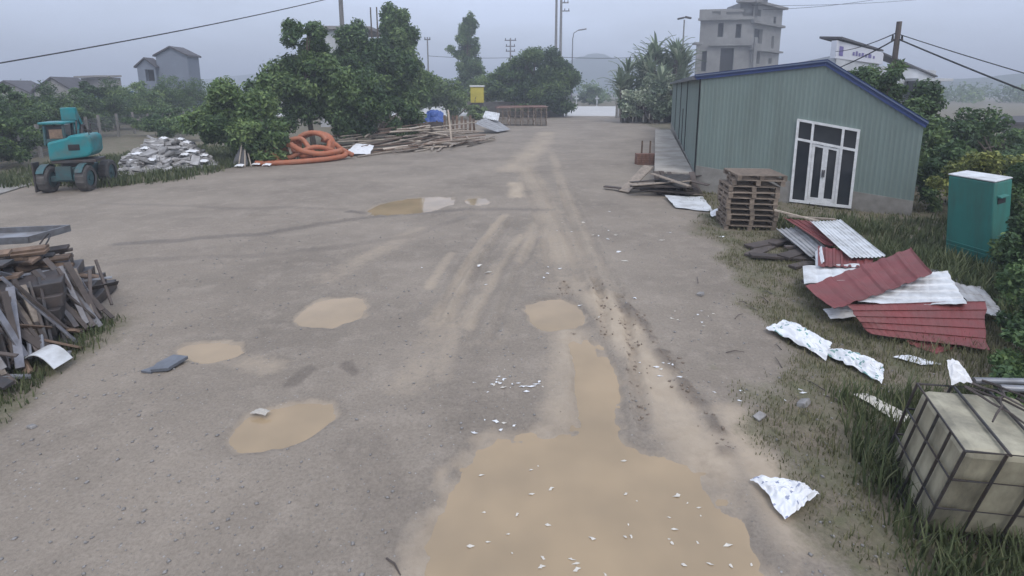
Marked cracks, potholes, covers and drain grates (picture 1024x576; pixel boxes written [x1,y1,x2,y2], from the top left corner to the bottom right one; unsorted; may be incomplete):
pothole [461,196,494,207]
pothole [375,332,817,576]
pothole [208,394,350,460]
pothole [356,194,462,218]
pothole [164,337,253,366]
pothole [515,294,595,336]
pothole [288,293,374,331]
